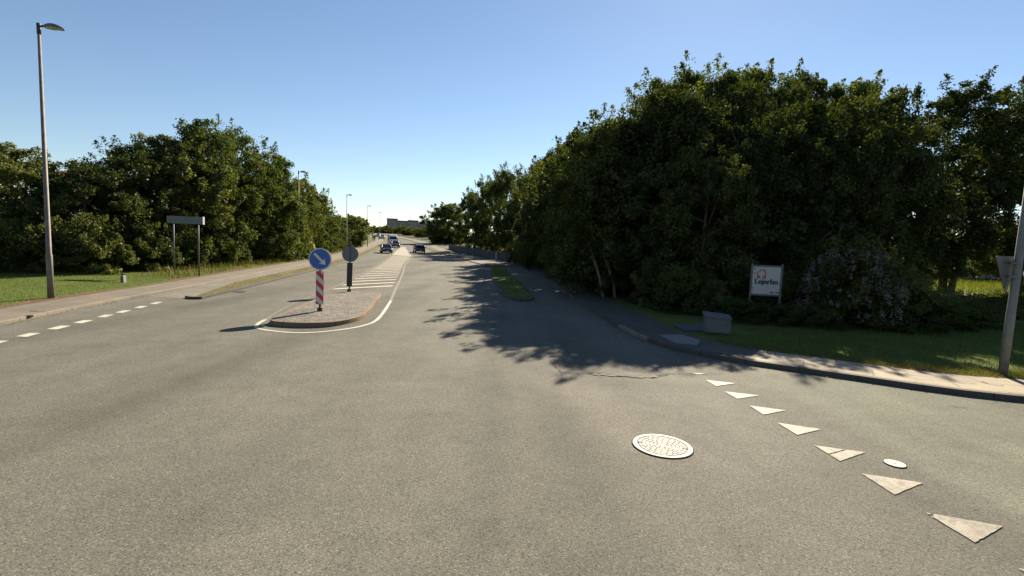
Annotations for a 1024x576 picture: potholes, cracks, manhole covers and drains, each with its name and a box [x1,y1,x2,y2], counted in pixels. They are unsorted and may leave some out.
manhole cover [883,459,907,469]
manhole cover [632,434,694,459]
